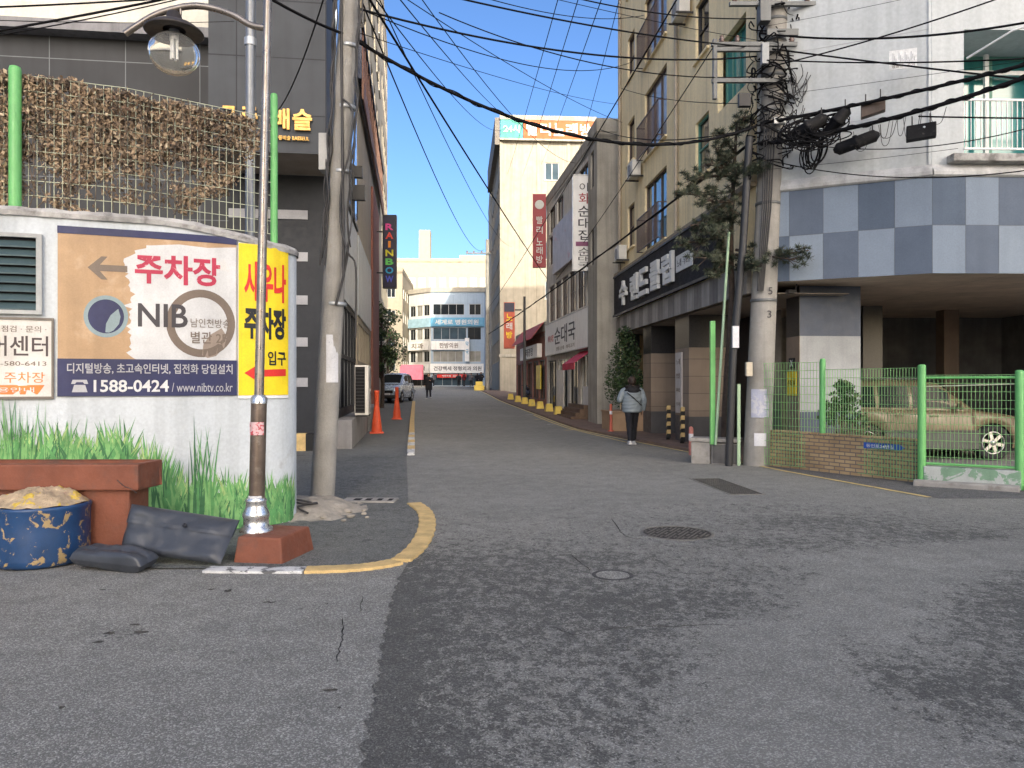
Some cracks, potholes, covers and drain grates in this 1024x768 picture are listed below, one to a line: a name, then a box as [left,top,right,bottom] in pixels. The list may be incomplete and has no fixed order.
crack [336,598,363,662]
utility cover [592,570,634,580]
